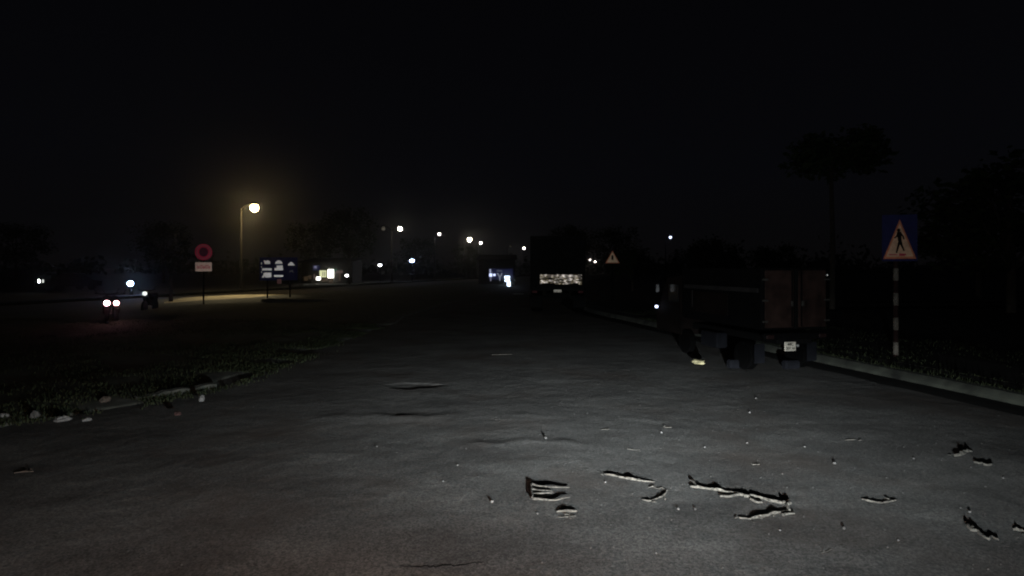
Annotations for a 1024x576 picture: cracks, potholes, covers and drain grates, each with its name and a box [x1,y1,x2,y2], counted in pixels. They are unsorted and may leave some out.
pothole [376,382,455,391]
